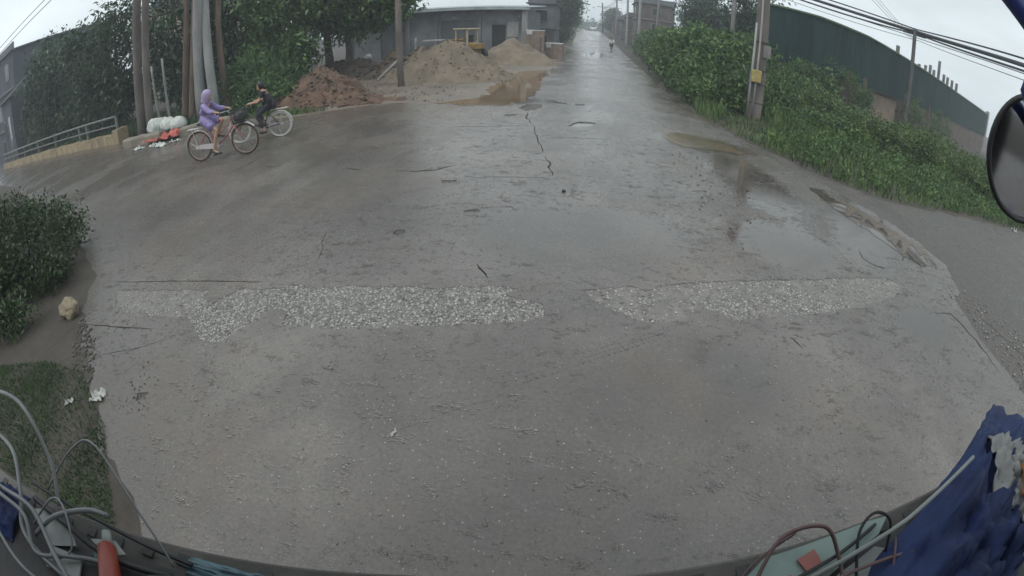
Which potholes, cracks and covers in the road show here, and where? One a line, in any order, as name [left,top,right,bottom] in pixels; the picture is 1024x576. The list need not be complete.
crack [87,324,165,355]
crack [393,113,553,178]
crack [933,312,1022,376]
